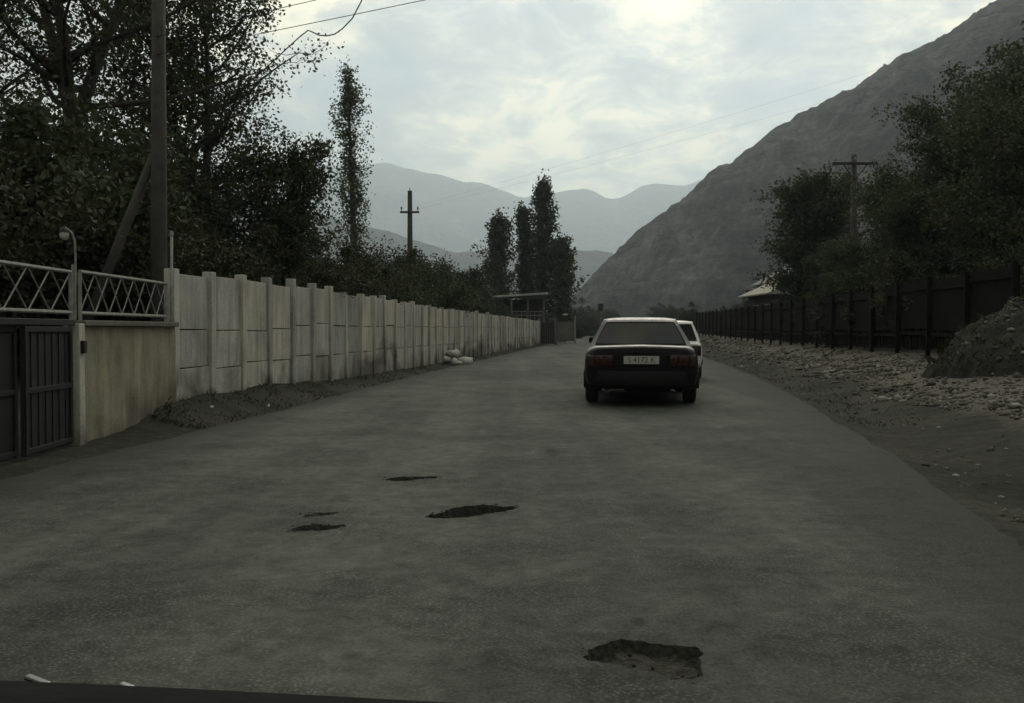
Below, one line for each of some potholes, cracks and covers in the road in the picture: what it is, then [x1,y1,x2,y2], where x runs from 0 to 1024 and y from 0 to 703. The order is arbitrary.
pothole [581,639,704,684]
pothole [425,504,519,520]
pothole [297,510,341,519]
pothole [287,523,351,532]
